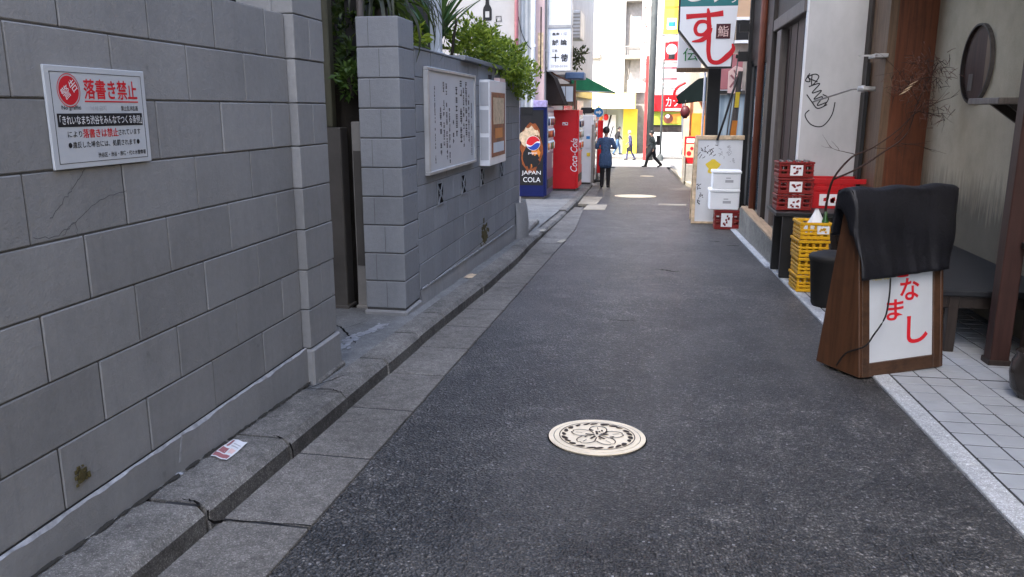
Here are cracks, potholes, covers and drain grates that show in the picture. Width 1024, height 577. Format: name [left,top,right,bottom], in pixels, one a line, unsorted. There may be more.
manhole cover [548,420,647,456]
